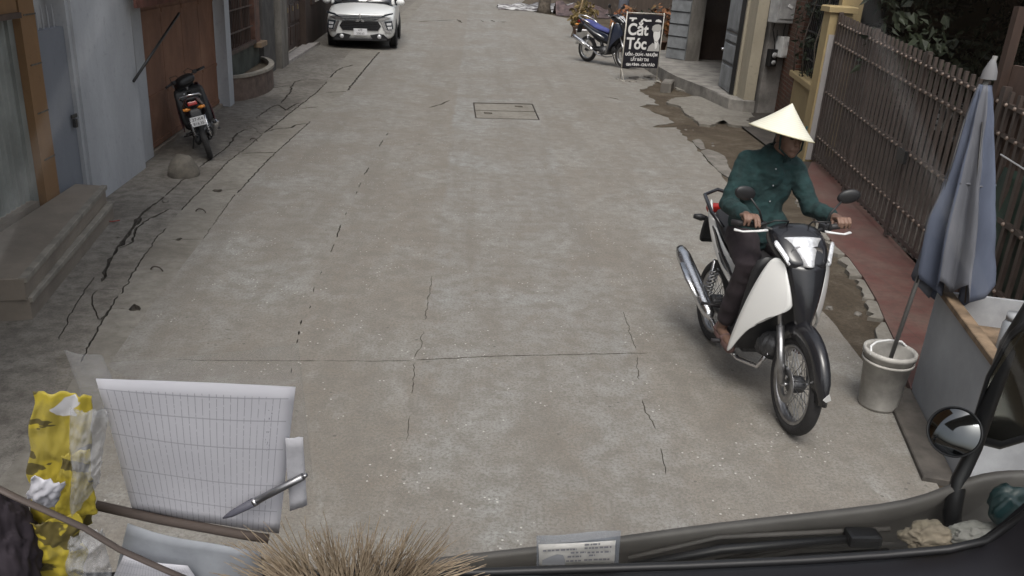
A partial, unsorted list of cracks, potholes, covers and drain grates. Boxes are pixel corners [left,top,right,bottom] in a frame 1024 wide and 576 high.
manhole cover [473,103,540,120]
crack [180,140,666,474]
crack [58,52,380,362]
